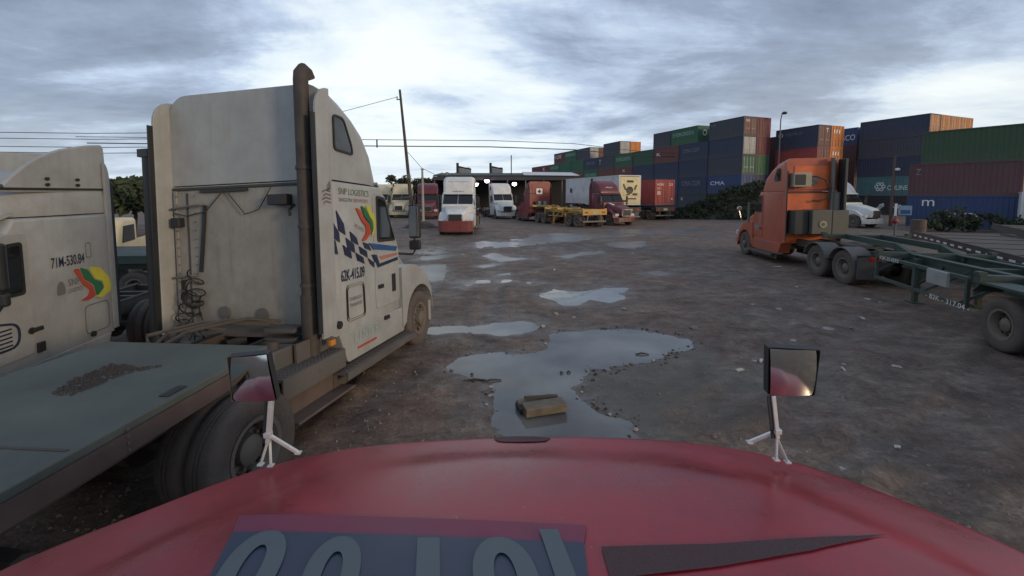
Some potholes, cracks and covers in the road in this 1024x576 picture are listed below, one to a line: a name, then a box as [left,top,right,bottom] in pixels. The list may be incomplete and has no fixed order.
pothole [467,321,539,336]
pothole [446,329,693,439]
